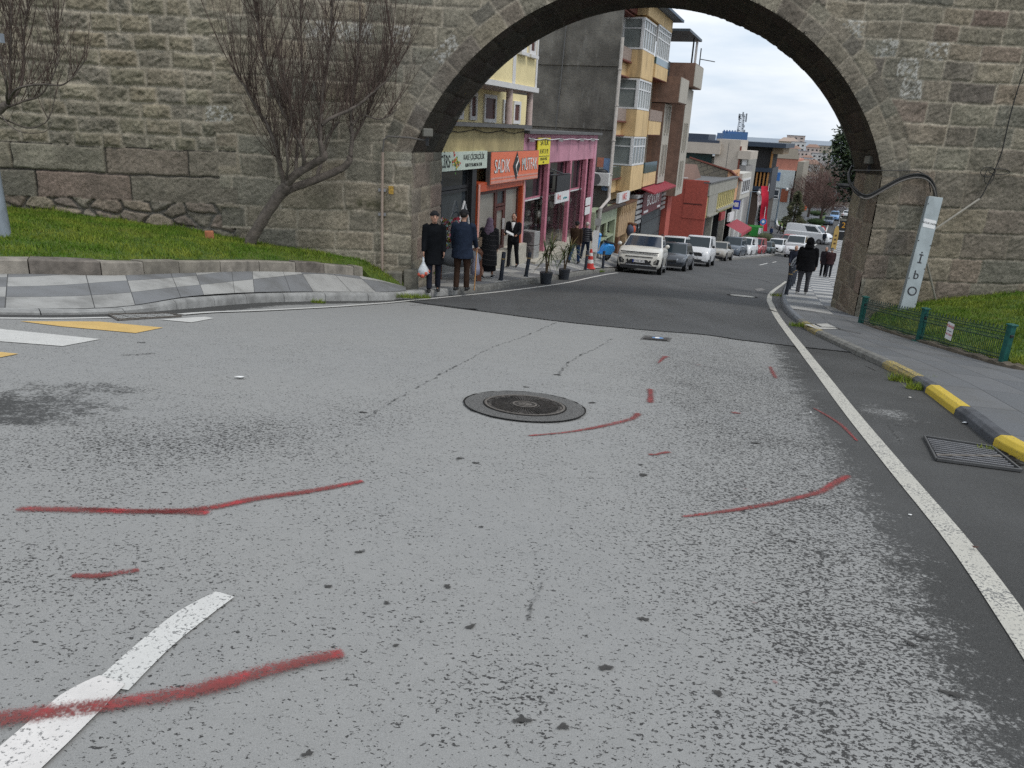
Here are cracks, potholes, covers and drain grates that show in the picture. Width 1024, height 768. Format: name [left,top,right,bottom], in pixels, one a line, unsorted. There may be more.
manhole cover [463,391,586,422]
drain grate [923,435,1023,472]
crack [365,323,554,418]
